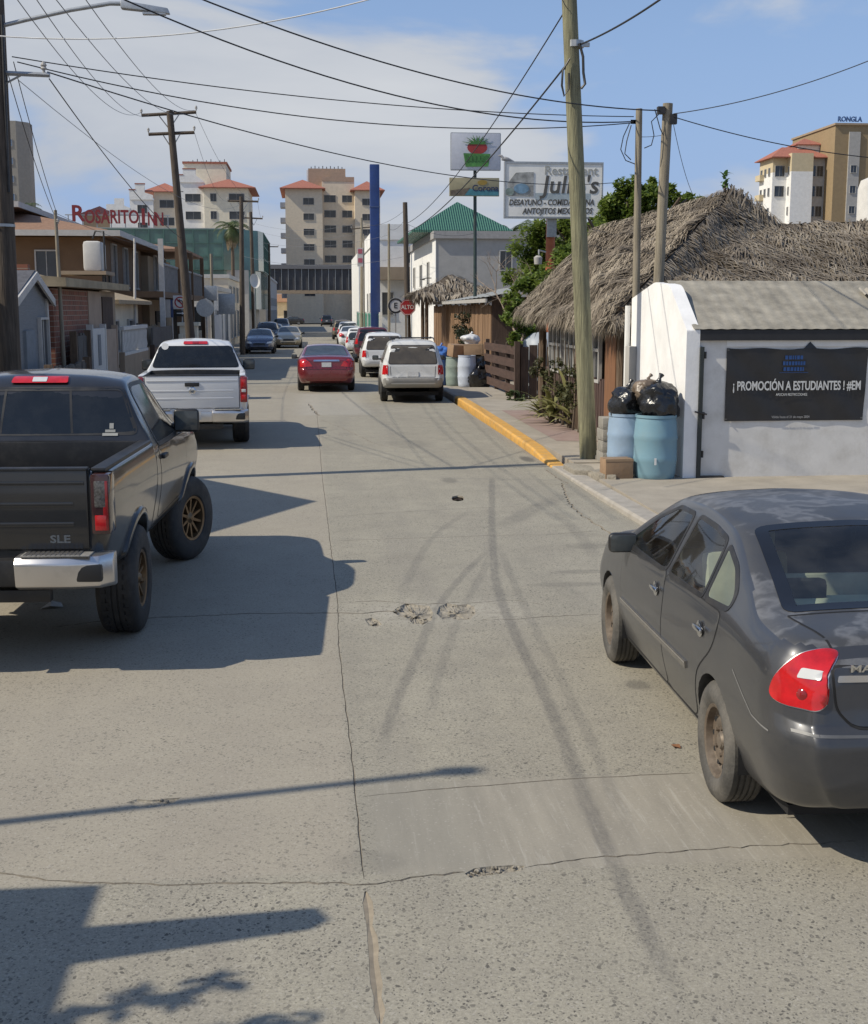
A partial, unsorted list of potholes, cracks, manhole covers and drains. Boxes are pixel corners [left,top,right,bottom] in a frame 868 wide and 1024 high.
pothole [437,603,476,620]
pothole [392,603,433,625]
crack [55,404,611,877]
pothole [465,865,524,878]
